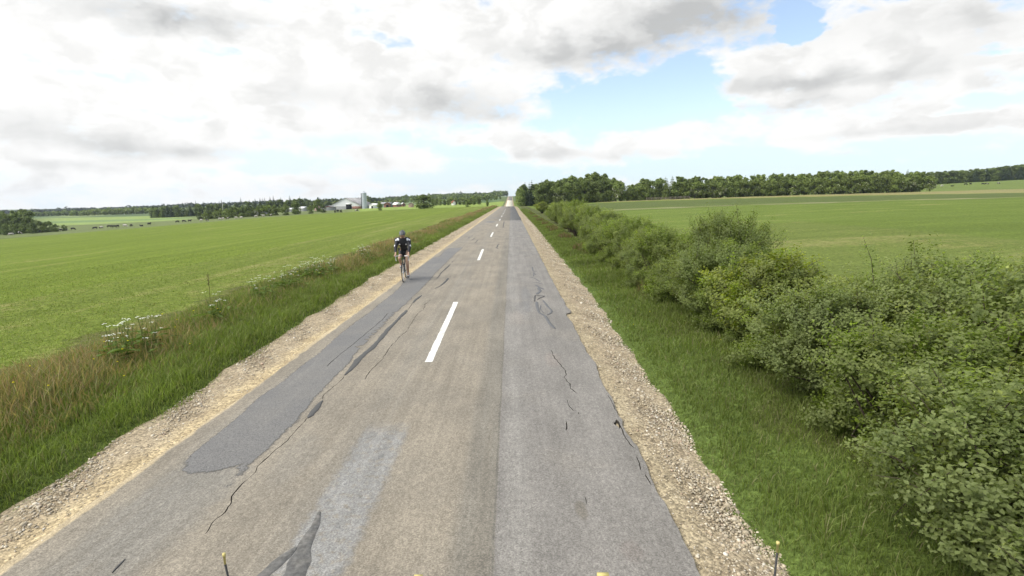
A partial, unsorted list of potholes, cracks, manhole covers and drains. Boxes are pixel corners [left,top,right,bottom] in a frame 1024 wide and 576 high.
crack [552,352,579,430]
crack [206,295,430,533]
crack [608,396,651,484]
